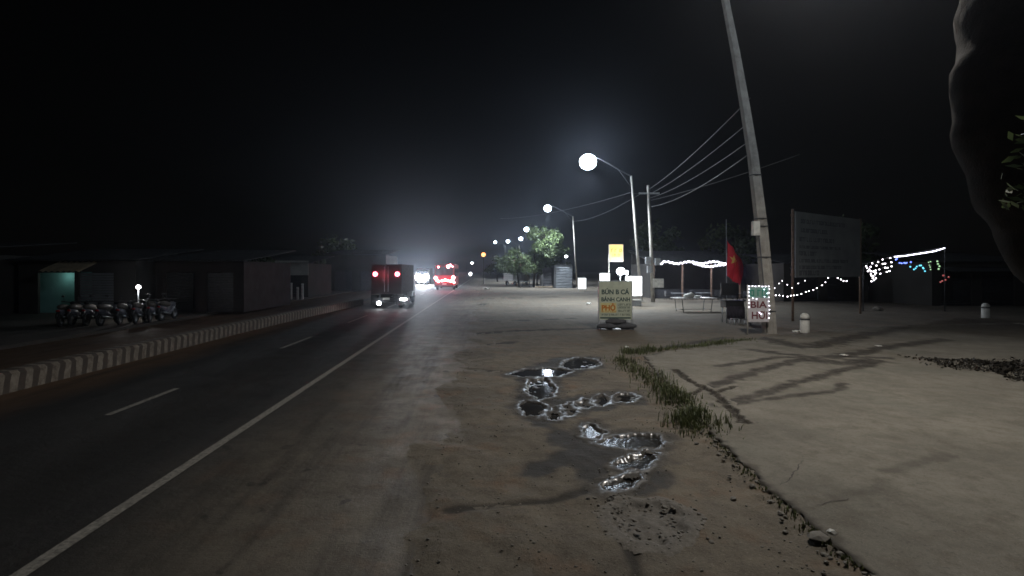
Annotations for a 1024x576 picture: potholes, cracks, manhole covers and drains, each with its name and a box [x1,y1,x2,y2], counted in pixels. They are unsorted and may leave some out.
pothole [582,392,621,408]
pothole [516,377,563,403]
pothole [538,406,575,423]
pothole [510,398,555,421]
pothole [602,446,669,480]
pothole [585,467,654,498]
pothole [554,356,605,371]
pothole [605,391,646,405]
pothole [565,397,602,411]
pothole [583,430,675,454]
pothole [552,401,587,418]
pothole [500,367,578,379]
